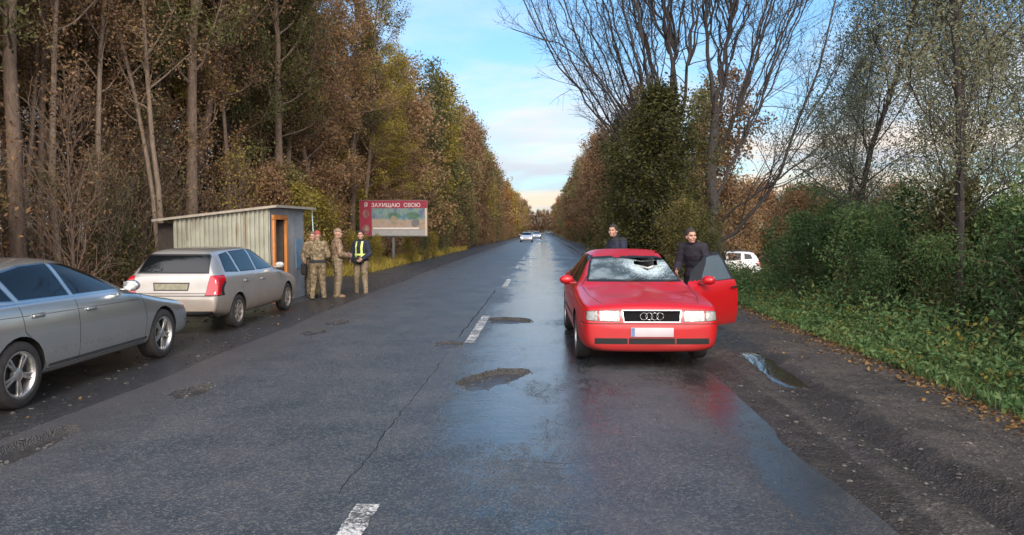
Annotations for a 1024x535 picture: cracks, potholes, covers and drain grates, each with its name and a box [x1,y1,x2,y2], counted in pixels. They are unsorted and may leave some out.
crack [339,291,495,494]
pothole [0,423,81,466]
pothole [299,328,327,336]
pothole [168,382,216,399]
pothole [450,368,531,391]
